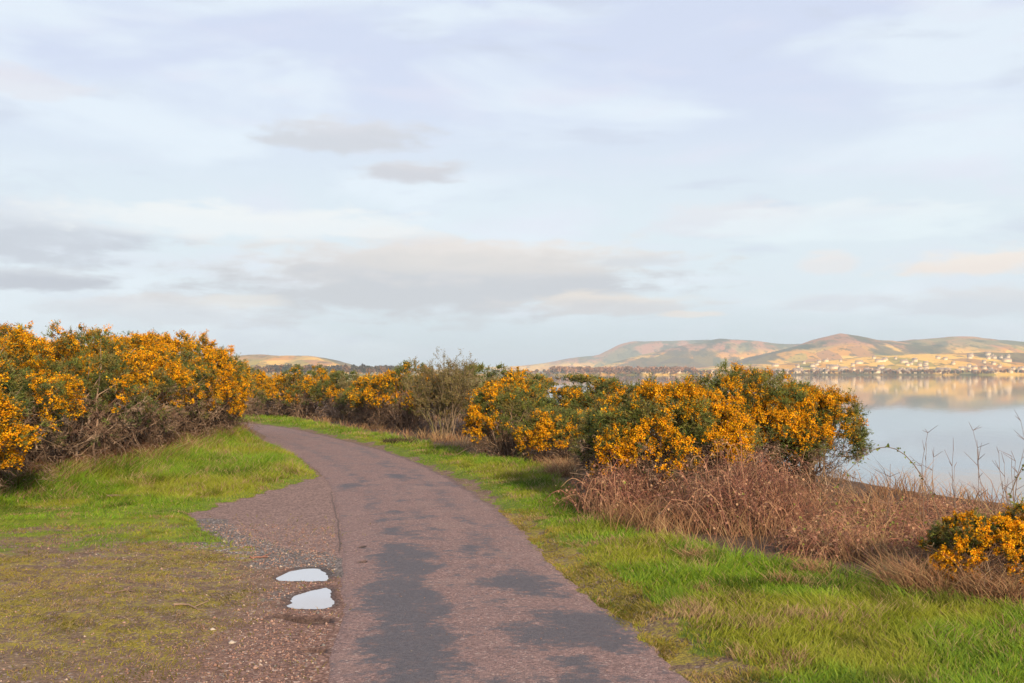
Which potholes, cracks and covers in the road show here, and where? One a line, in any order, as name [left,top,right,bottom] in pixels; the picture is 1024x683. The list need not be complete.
crack [329,491,341,555]
pothole [280,585,342,610]
pothole [270,567,336,582]
